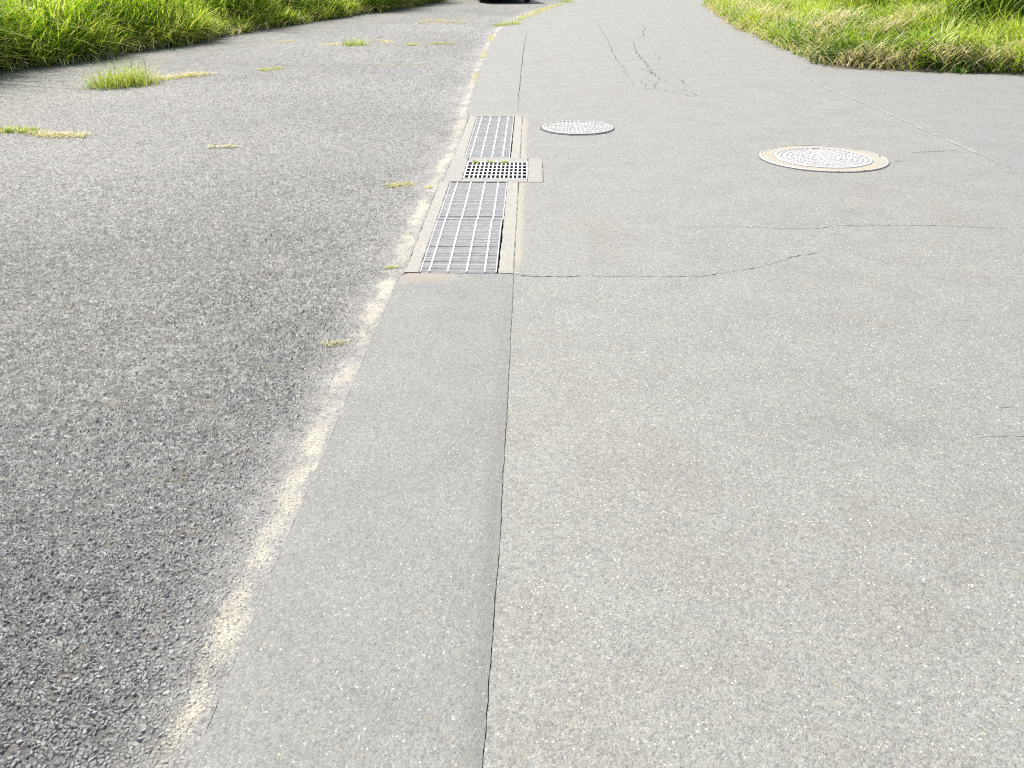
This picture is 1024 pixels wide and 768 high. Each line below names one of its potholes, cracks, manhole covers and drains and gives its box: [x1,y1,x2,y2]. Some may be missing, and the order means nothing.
drain grate [463,162,528,179]
drain grate [420,220,502,274]
